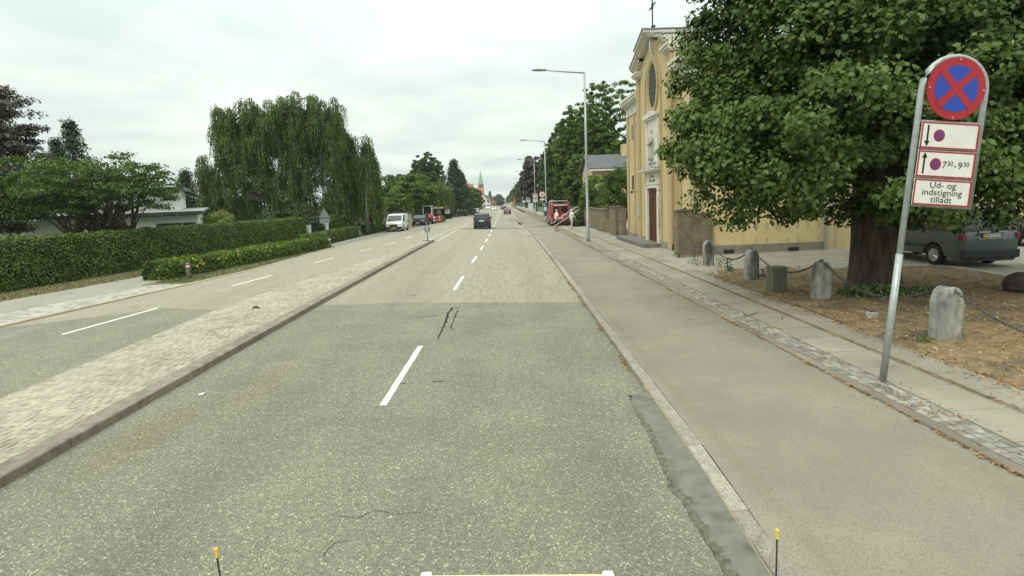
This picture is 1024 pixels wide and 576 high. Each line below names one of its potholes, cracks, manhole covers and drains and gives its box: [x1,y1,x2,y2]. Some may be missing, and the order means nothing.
crack [423,307,458,339]
